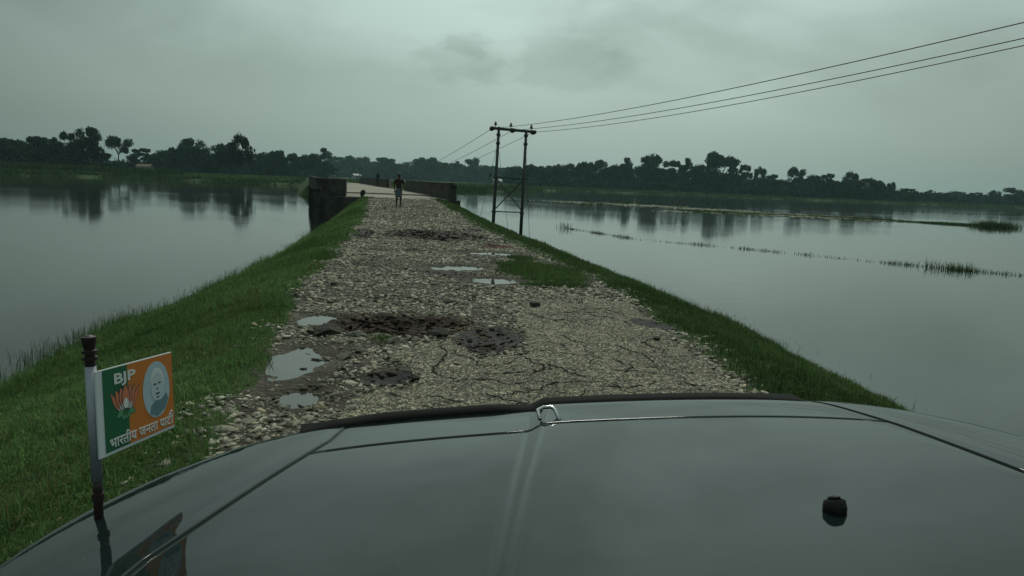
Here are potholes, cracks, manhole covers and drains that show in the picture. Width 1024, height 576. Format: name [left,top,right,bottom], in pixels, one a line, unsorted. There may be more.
pothole [392,230,482,242]
pothole [360,369,419,387]
crack [388,297,738,408]
pothole [324,313,470,337]
pothole [452,327,522,354]
